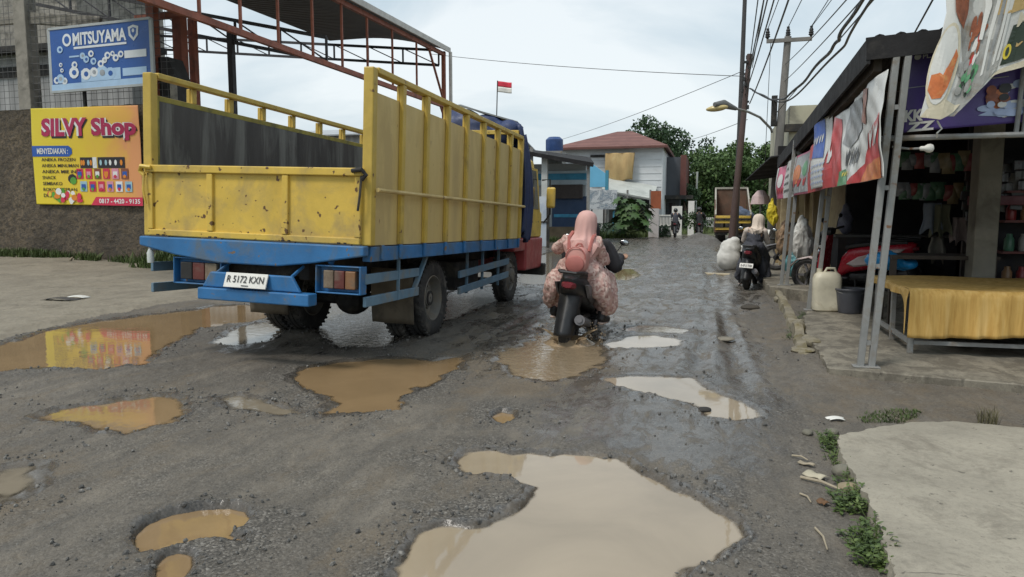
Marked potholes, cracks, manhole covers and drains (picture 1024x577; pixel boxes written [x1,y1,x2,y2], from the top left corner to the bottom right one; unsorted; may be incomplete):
pothole [147,543,200,577]
pothole [601,333,687,350]
pothole [489,406,522,423]
pothole [0,458,56,505]
pothole [210,320,288,347]
pothole [129,497,258,552]
pothole [24,391,195,435]
pothole [289,353,474,417]
pothole [210,391,314,416]
pothole [483,331,617,382]
pothole [0,303,267,371]
pothole [599,373,769,421]
